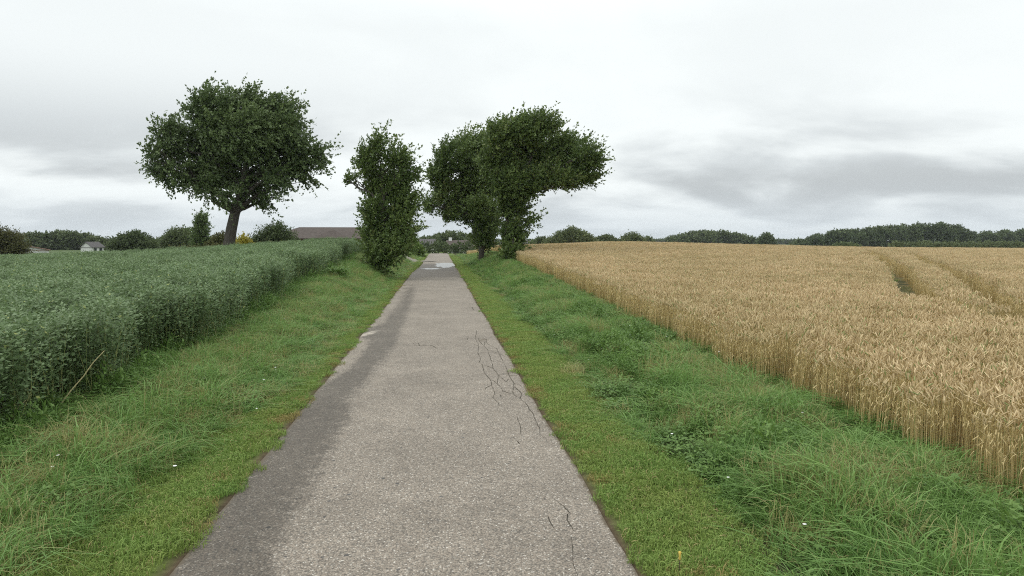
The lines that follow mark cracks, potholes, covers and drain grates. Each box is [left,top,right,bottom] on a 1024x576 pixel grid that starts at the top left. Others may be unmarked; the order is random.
crack [467,330,546,444]
crack [548,499,578,575]
